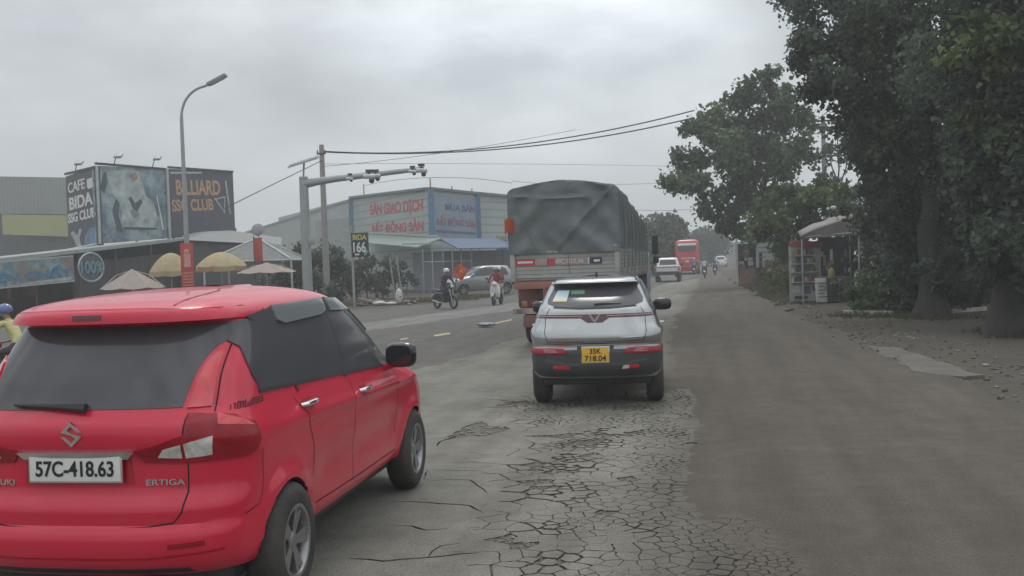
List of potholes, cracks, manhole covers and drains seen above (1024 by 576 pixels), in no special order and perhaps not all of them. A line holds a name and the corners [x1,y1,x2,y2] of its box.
pothole [444,422,509,440]
crack [350,388,807,576]
